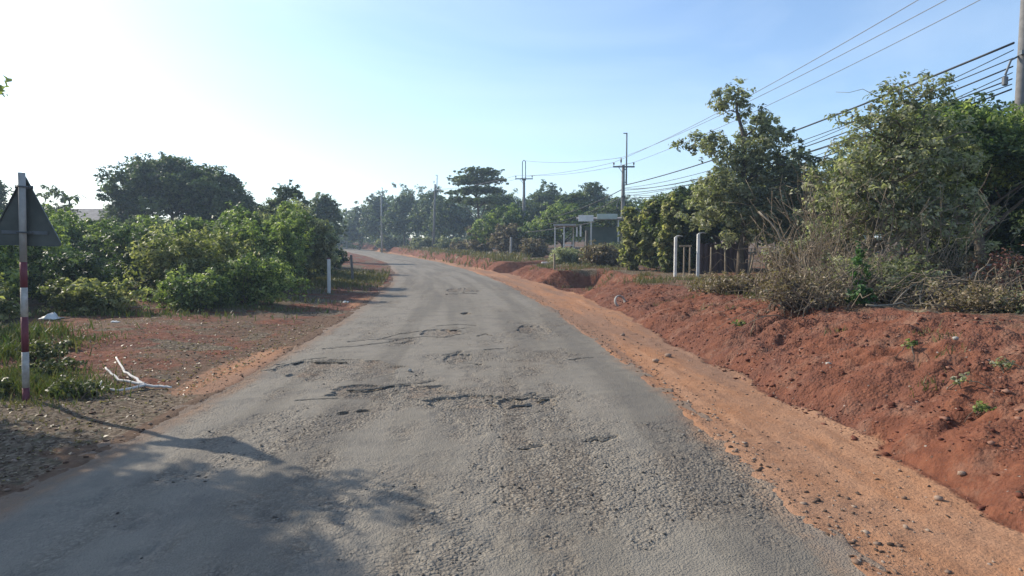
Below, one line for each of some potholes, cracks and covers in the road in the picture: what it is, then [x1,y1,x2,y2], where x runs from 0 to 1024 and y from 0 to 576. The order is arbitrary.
pothole [261,358,413,383]
pothole [418,329,463,337]
pothole [419,393,531,411]
pothole [442,353,473,365]
pothole [319,384,461,402]
pothole [516,325,553,335]
pothole [492,396,559,413]
